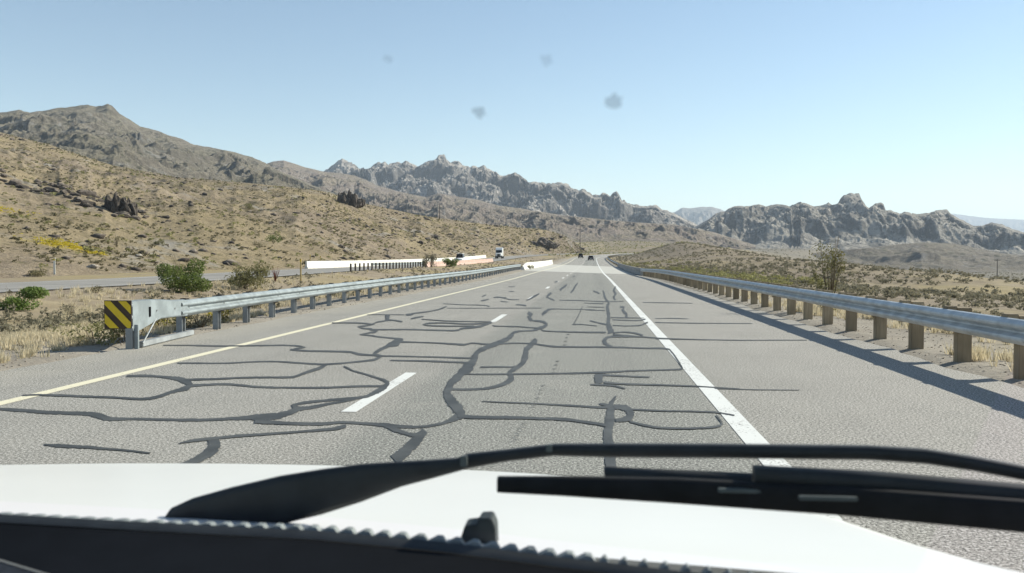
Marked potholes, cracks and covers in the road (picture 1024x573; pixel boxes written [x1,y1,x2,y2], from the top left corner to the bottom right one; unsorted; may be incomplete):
crack [514,300,773,440]
crack [443,286,526,307]
